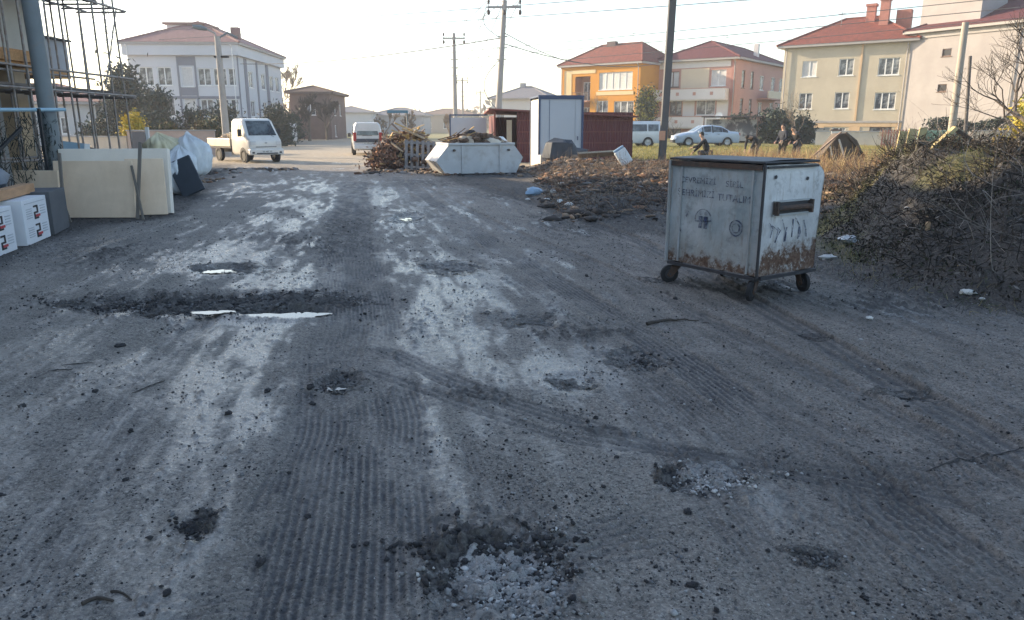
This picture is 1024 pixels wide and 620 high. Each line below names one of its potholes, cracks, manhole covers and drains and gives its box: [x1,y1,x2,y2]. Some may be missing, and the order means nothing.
pothole [765,538,845,578]
pothole [355,514,609,620]
pothole [1,286,403,330]
pothole [543,371,601,393]
pothole [559,345,687,391]
pothole [861,385,947,404]
pothole [412,260,489,276]
pothole [296,367,374,396]
pothole [189,261,276,275]
pothole [649,456,798,508]
pothole [145,507,223,544]
